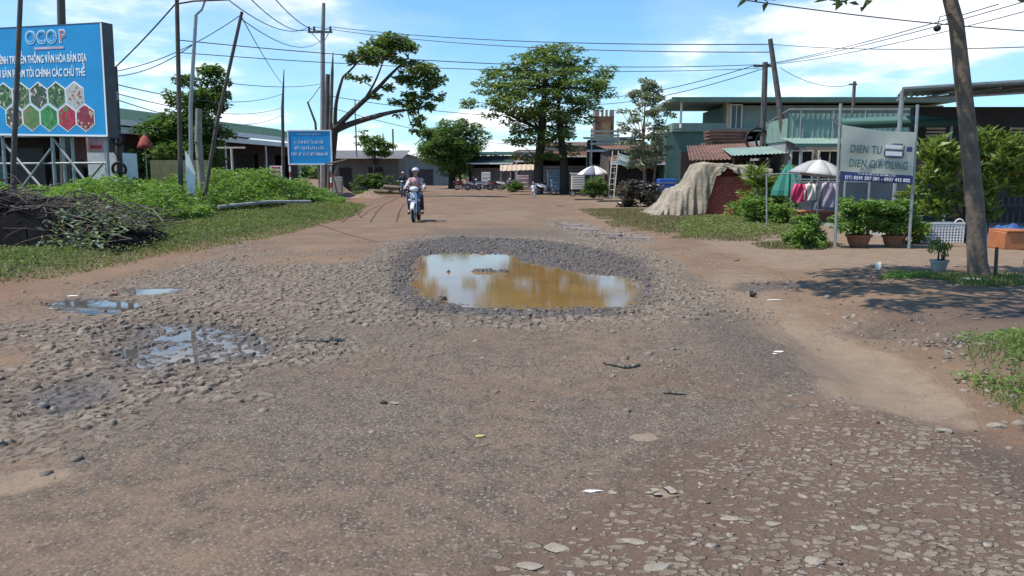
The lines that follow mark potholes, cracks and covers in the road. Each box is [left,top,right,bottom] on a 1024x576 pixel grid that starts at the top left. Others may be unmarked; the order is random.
pothole [0,369,125,438]
pothole [116,285,198,298]
pothole [76,312,321,395]
pothole [28,294,151,318]
pothole [378,236,671,321]
